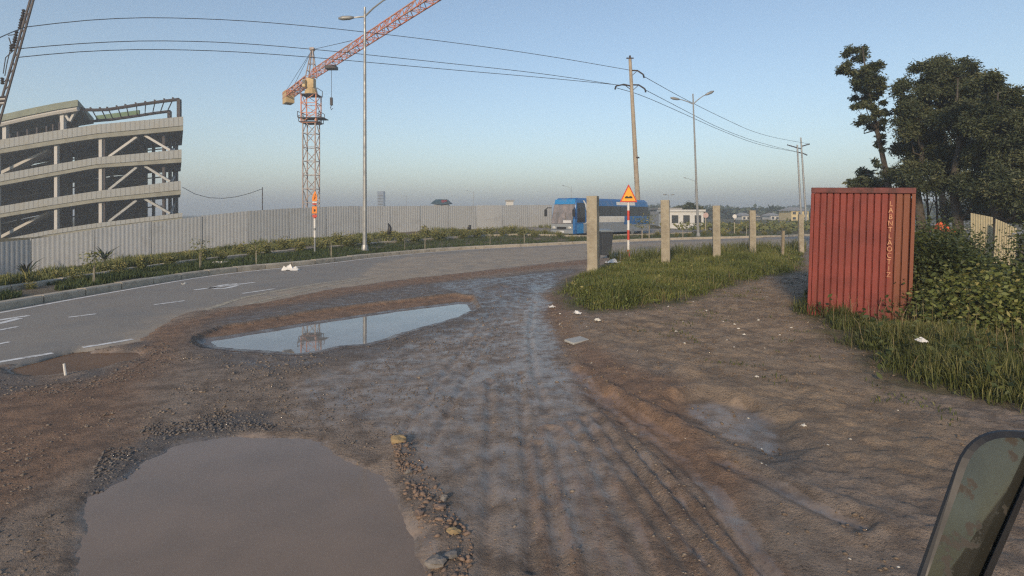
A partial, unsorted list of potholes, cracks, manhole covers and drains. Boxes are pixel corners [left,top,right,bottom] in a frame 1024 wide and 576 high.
pothole [36,426,471,576]
pothole [182,292,485,358]
pothole [0,345,159,386]
